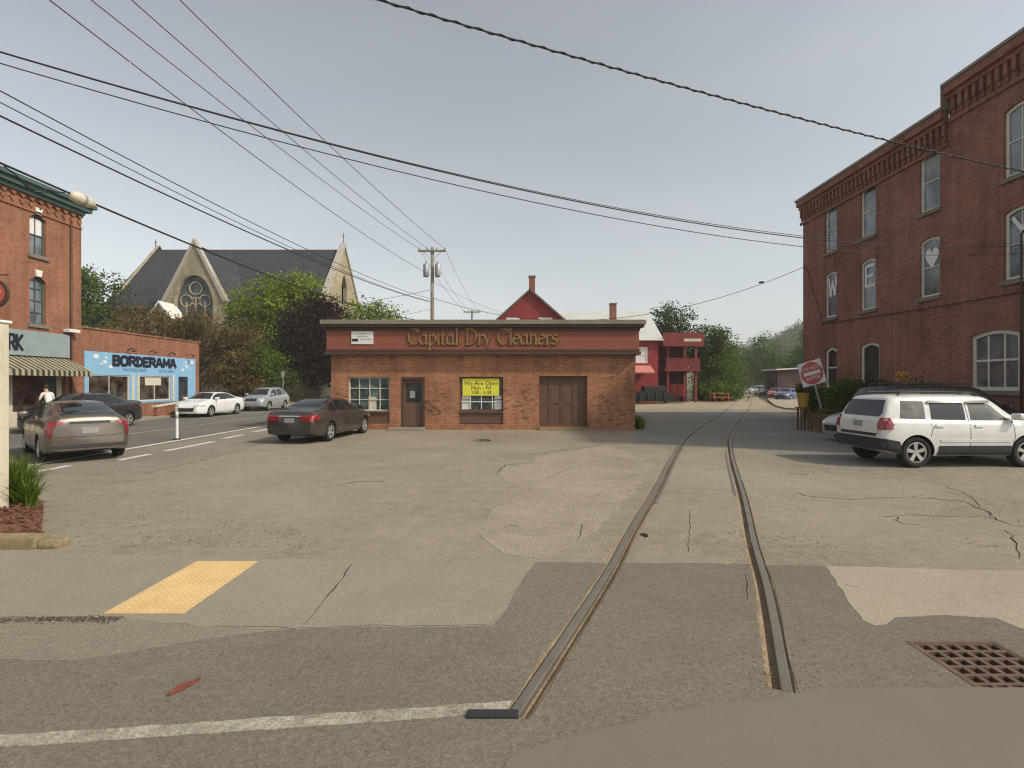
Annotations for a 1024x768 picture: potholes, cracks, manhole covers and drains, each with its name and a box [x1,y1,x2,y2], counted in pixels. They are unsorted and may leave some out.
drain grate [905,641,1024,688]
crack [497,444,603,478]
crack [797,488,1020,558]
